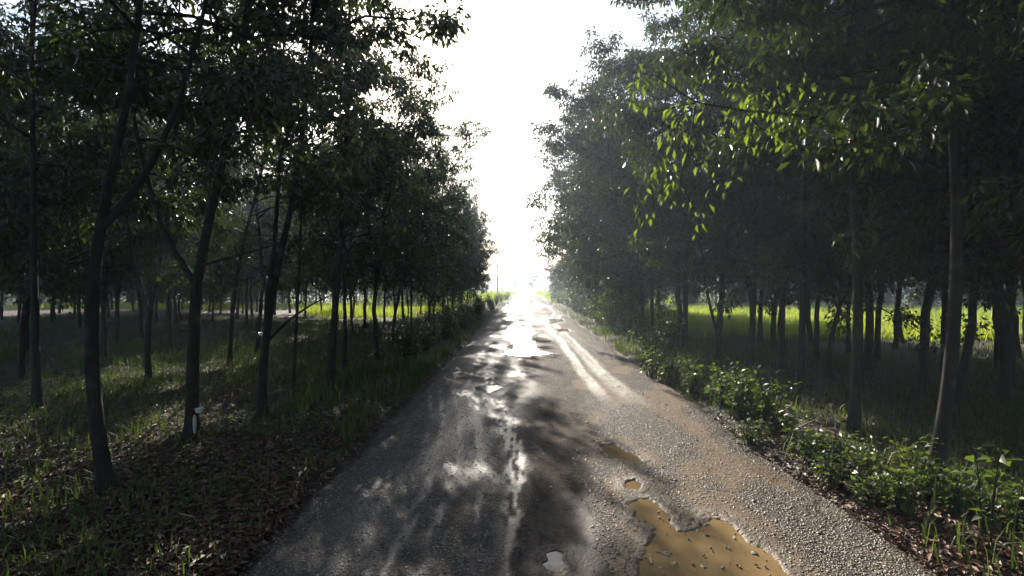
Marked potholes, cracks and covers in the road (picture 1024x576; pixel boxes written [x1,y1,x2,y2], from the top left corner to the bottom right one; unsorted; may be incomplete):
pothole [529,544,578,576]
pothole [469,384,506,396]
pothole [593,440,652,465]
pothole [620,493,807,576]
pothole [616,476,653,493]
